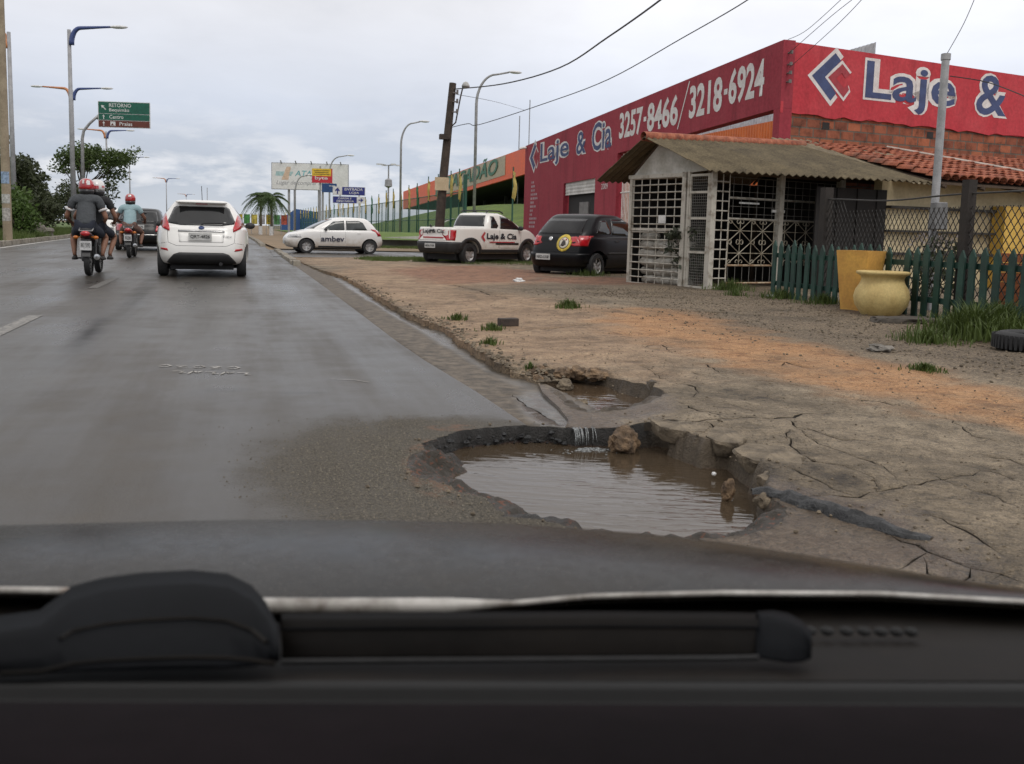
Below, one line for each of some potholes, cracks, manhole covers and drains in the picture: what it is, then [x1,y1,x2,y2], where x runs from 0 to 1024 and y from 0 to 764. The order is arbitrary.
crack [686,365,1003,502]
pothole [528,369,667,412]
pothole [407,419,788,540]
crack [893,519,1009,581]
